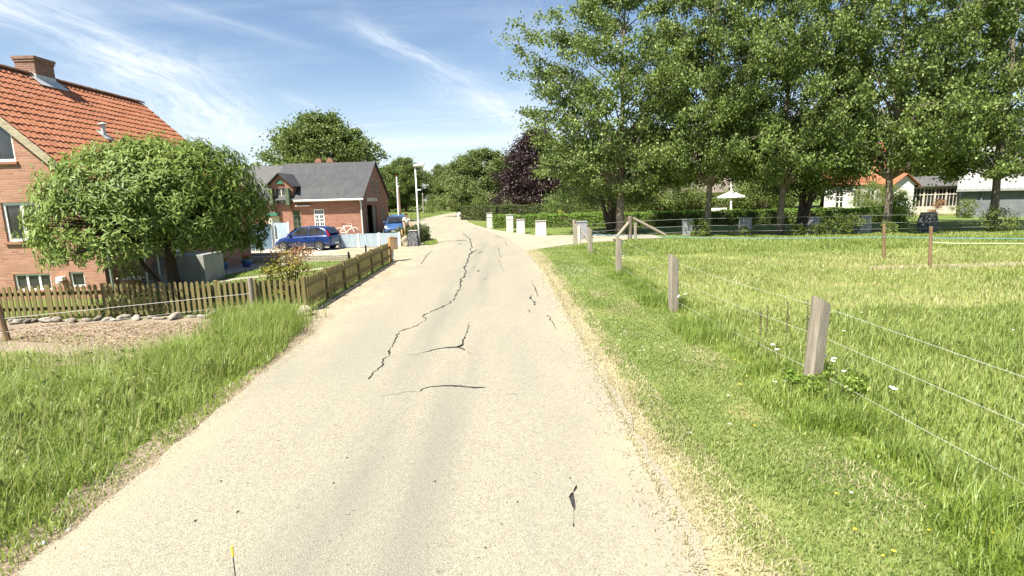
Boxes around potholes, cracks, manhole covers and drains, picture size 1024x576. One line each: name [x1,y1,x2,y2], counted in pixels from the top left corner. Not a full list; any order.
crack [368,234,507,396]
crack [569,477,577,527]
